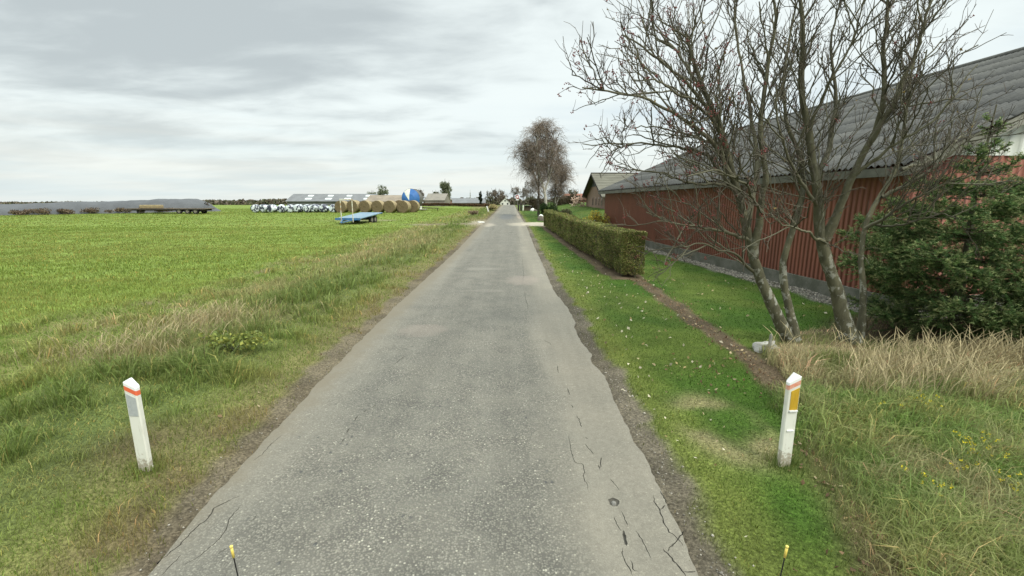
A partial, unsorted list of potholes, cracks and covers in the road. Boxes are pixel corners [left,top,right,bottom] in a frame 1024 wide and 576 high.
crack [546,341,695,576]
crack [157,496,256,574]
